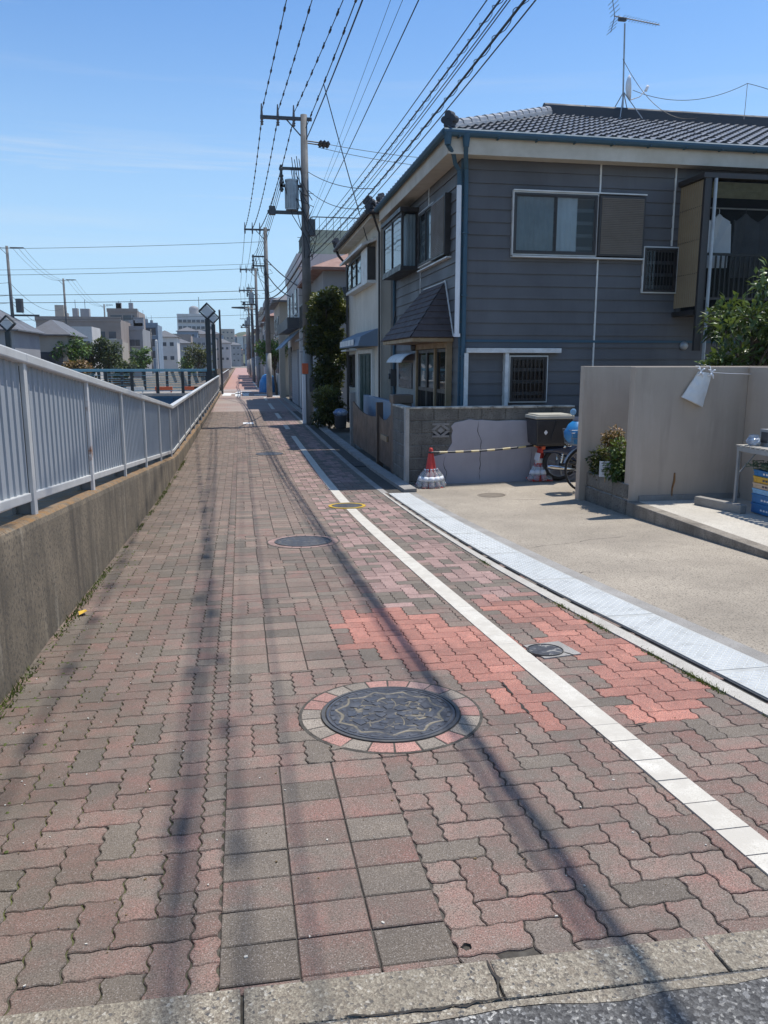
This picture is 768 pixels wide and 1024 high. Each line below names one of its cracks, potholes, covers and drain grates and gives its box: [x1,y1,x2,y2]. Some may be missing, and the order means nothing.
manhole cover [266,535,340,549]
manhole cover [299,680,483,755]
manhole cover [523,641,581,659]
